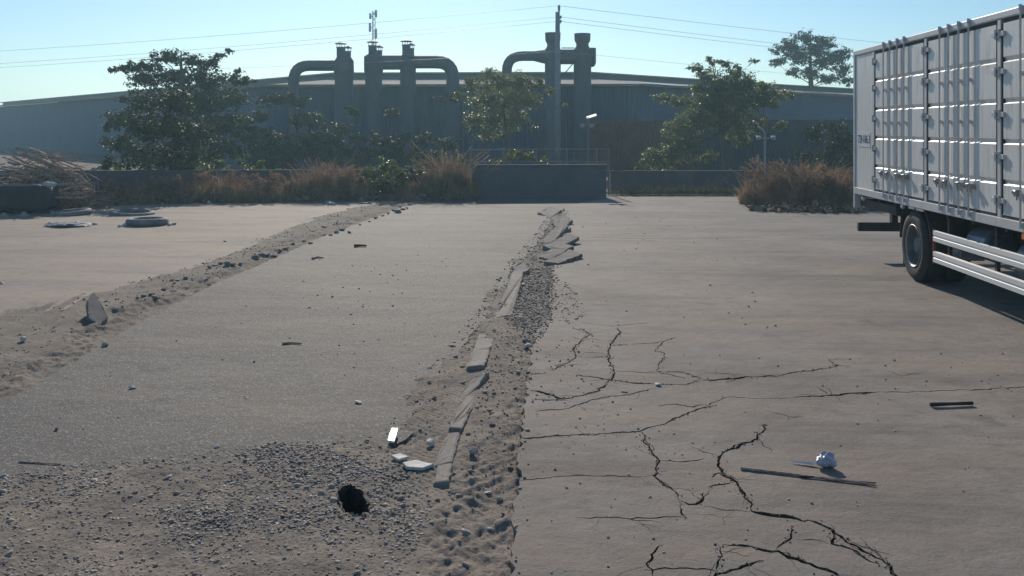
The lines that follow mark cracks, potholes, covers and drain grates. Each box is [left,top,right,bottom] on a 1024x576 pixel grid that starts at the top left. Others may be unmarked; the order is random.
crack [510,323,897,576]
pothole [335,483,374,517]
